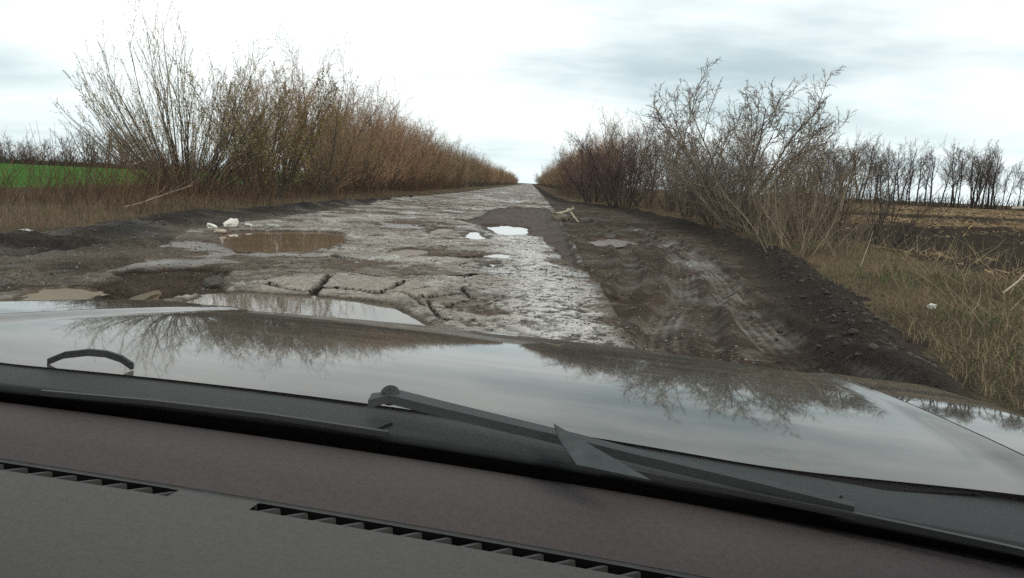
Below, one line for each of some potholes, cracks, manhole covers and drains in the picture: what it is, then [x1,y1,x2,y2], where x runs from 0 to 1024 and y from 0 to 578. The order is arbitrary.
pothole [584,236,641,249]
pothole [383,246,431,257]
pothole [176,288,441,327]
pothole [80,265,231,300]
pothole [459,207,582,272]
crack [267,254,526,322]
pothole [11,285,108,301]
pothole [212,229,349,254]
